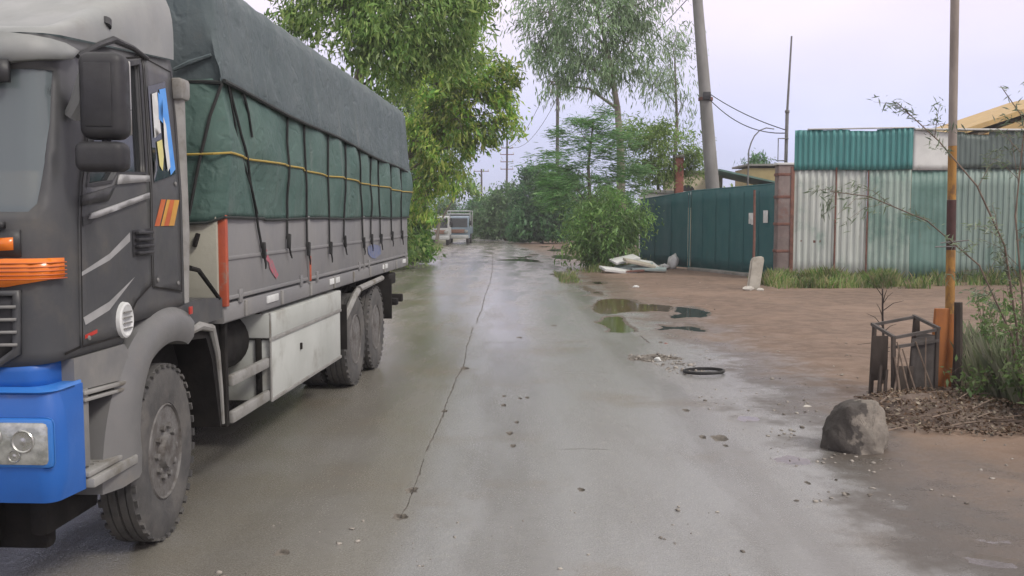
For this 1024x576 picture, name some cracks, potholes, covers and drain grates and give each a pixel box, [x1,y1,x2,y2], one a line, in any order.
crack [400,328,473,518]
